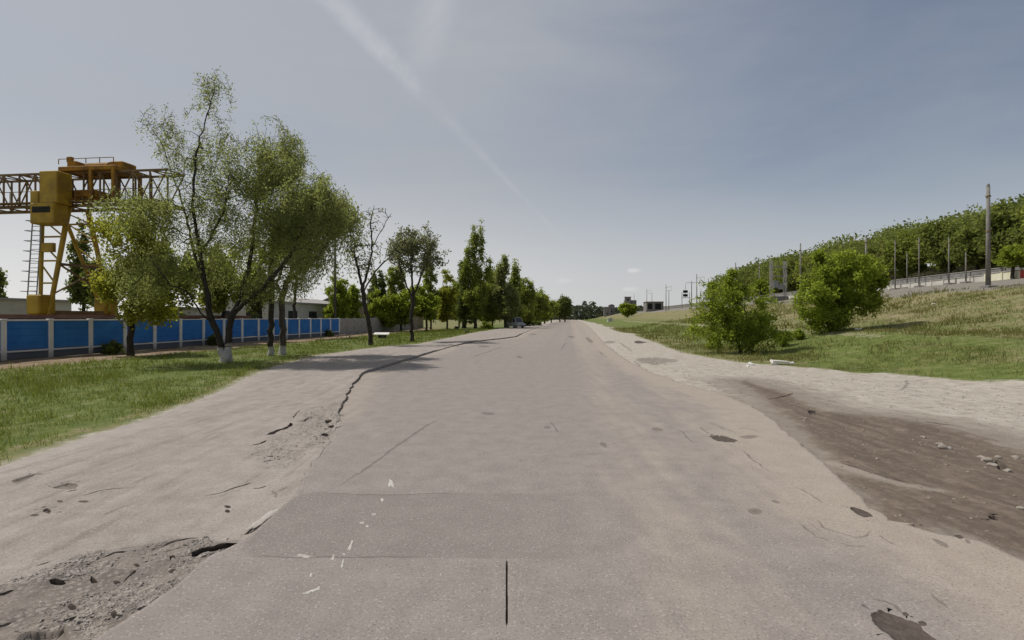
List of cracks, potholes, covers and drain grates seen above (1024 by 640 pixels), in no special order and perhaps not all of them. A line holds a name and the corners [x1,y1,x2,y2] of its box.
pothole [155,552,192,571]
crack [677,422,898,547]
pothole [853,603,951,640]
pothole [171,534,247,563]
pothole [839,504,888,521]
pothole [3,616,88,640]
pothole [704,434,745,444]
crack [243,409,331,447]
crack [490,555,524,634]
